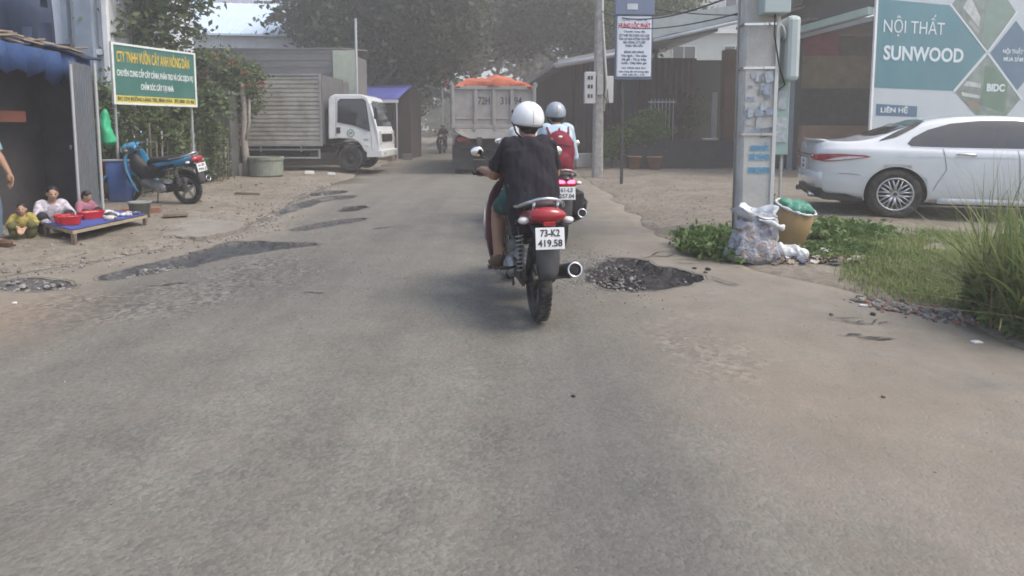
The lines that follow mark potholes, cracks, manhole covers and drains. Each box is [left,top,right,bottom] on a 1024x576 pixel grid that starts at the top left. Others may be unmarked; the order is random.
pothole [260,195,358,217]
pothole [288,217,369,231]
pothole [92,240,321,281]
pothole [0,276,82,292]
pothole [581,257,708,293]
